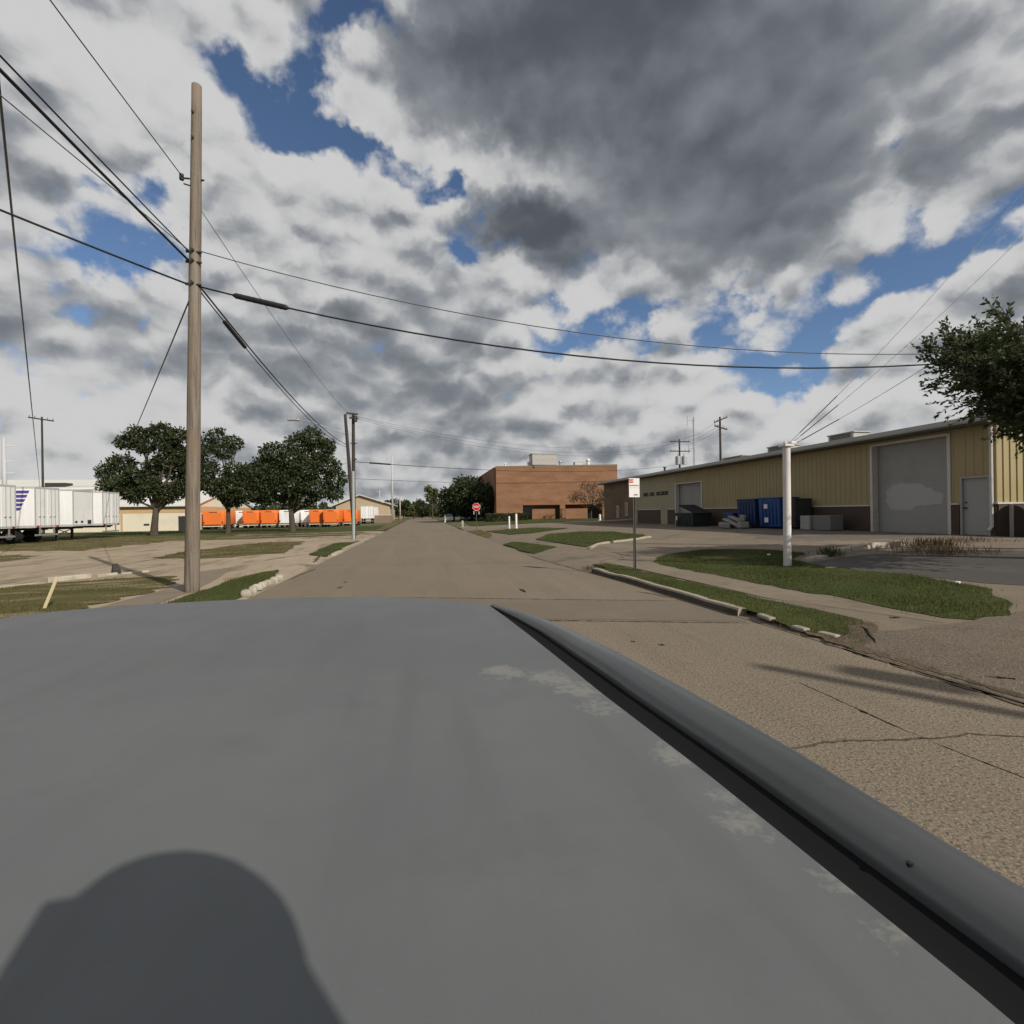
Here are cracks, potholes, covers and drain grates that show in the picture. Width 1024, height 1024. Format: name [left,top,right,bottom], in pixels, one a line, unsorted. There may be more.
crack [790,683,1024,778]
